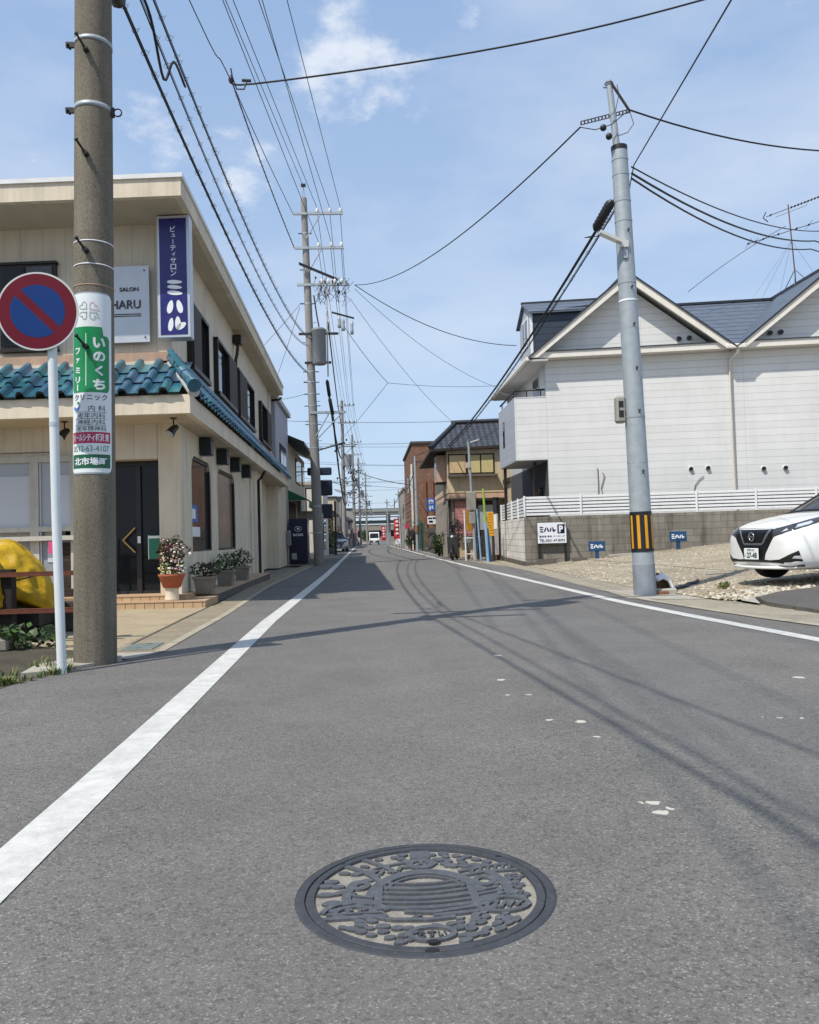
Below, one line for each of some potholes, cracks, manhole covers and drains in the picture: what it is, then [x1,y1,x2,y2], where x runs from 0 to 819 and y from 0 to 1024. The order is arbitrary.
manhole cover [295,844,557,959]
